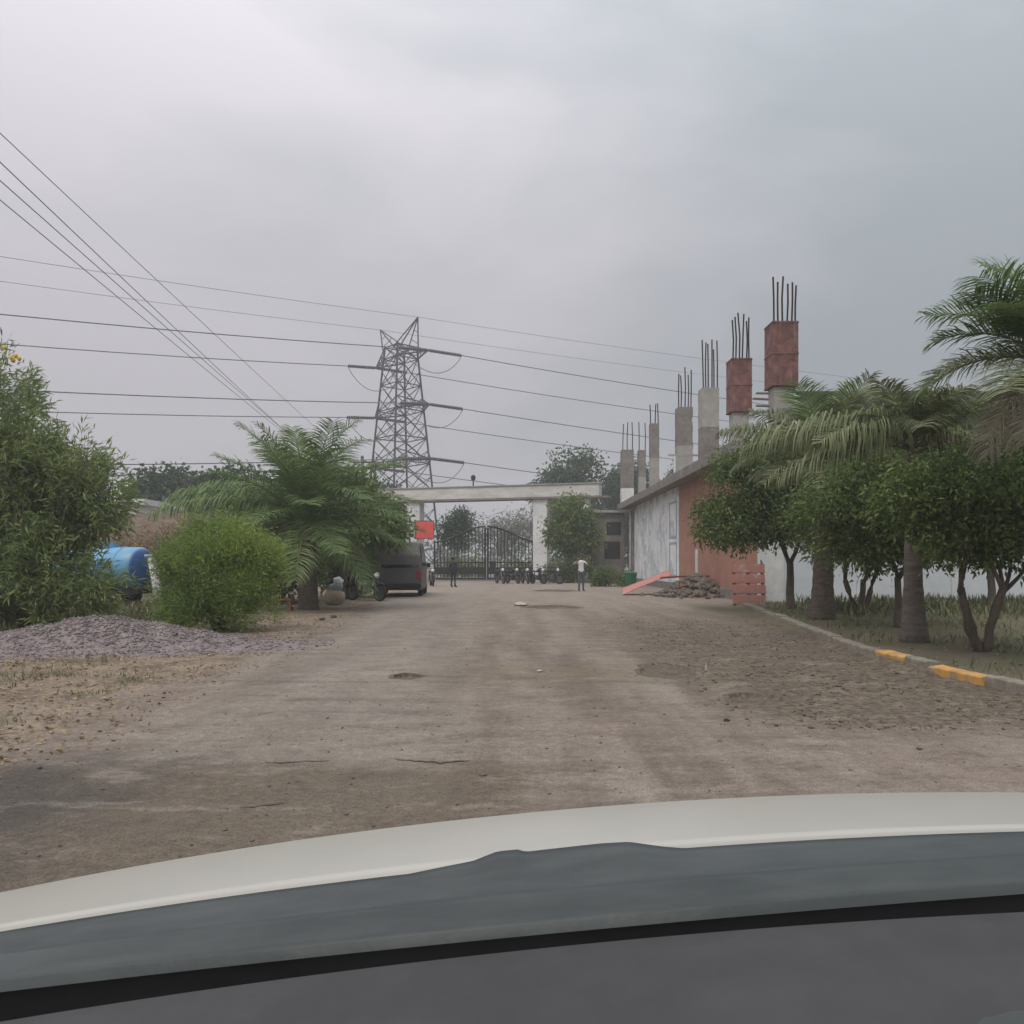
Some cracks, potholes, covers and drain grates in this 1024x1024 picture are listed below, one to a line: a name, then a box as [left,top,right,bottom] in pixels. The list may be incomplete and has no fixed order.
pothole [722,692,791,707]
pothole [633,662,696,679]
